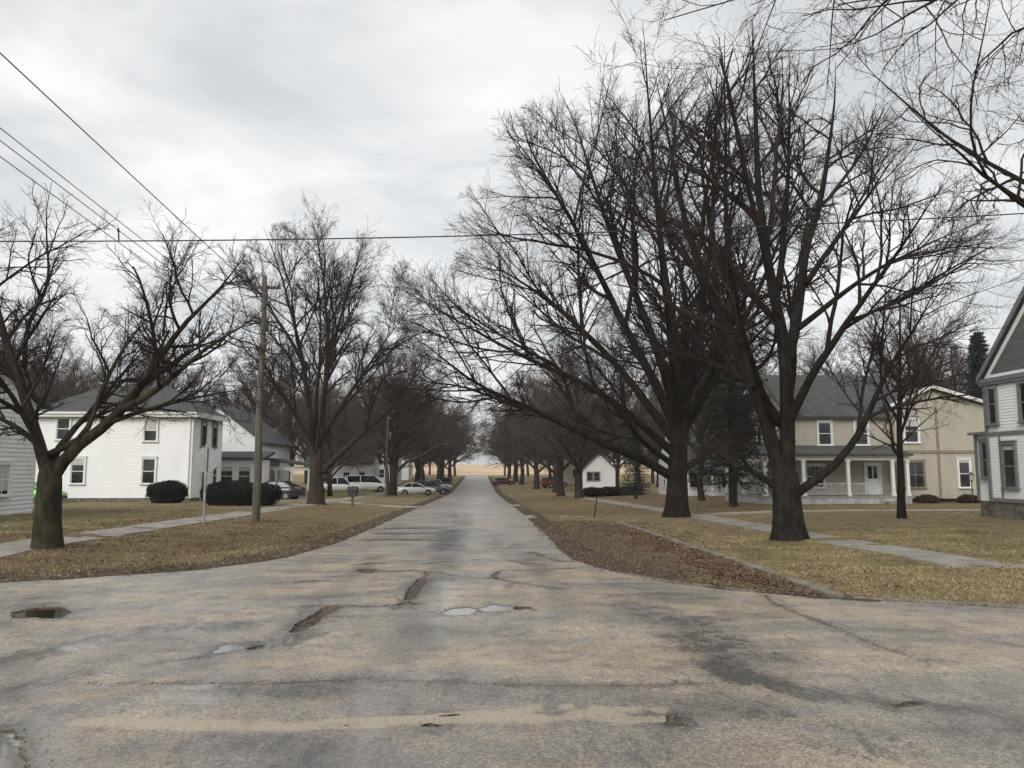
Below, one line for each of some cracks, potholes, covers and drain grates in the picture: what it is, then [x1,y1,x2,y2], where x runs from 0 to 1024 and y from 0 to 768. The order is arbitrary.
pothole [477,604,516,612]
pothole [0,729,29,768]
pothole [404,578,427,600]
crack [764,594,914,658]
pothole [210,644,249,653]
pothole [664,714,685,726]
crack [339,552,577,589]
pothole [11,607,73,619]
pothole [289,606,341,633]
pothole [440,607,478,615]
